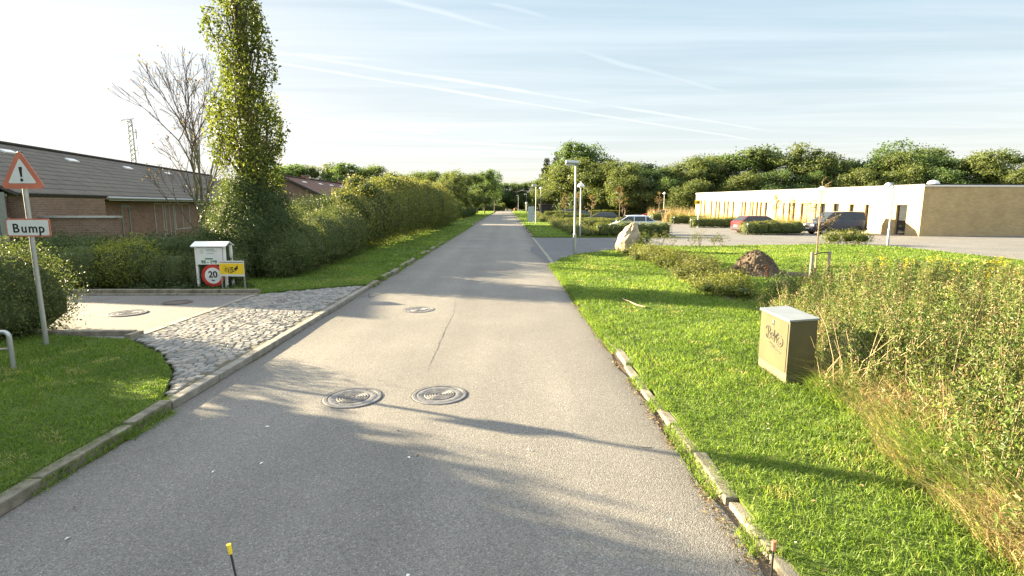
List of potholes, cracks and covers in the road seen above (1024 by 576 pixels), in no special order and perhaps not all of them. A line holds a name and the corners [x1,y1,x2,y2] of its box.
manhole cover [410,385,468,405]
manhole cover [105,309,149,317]
manhole cover [321,387,384,408]
